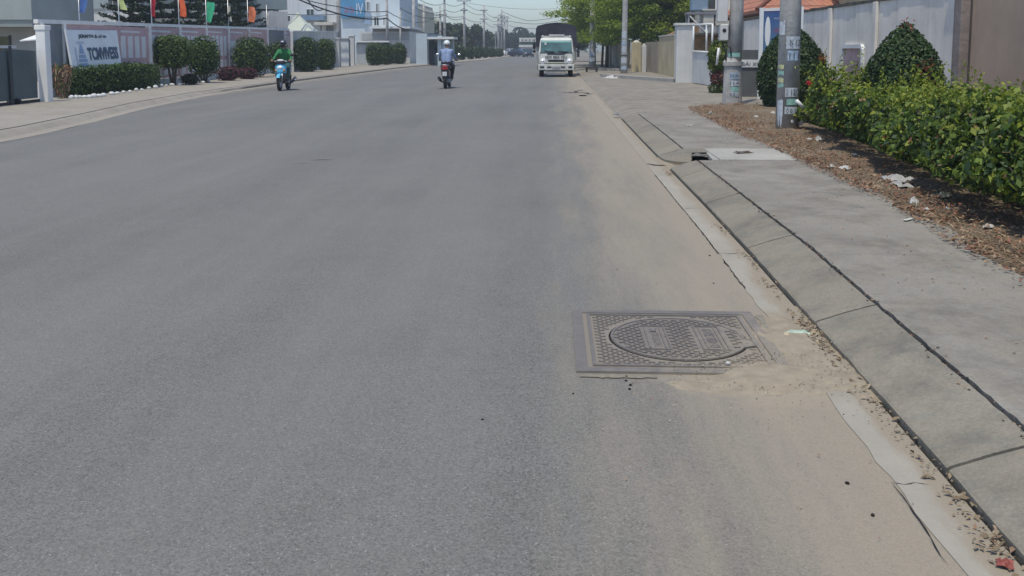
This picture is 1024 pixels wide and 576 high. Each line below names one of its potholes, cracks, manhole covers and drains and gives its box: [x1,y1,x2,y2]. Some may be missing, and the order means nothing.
crack [893,482,946,562]
manhole cover [572,309,791,375]
drain grate [657,149,708,170]
